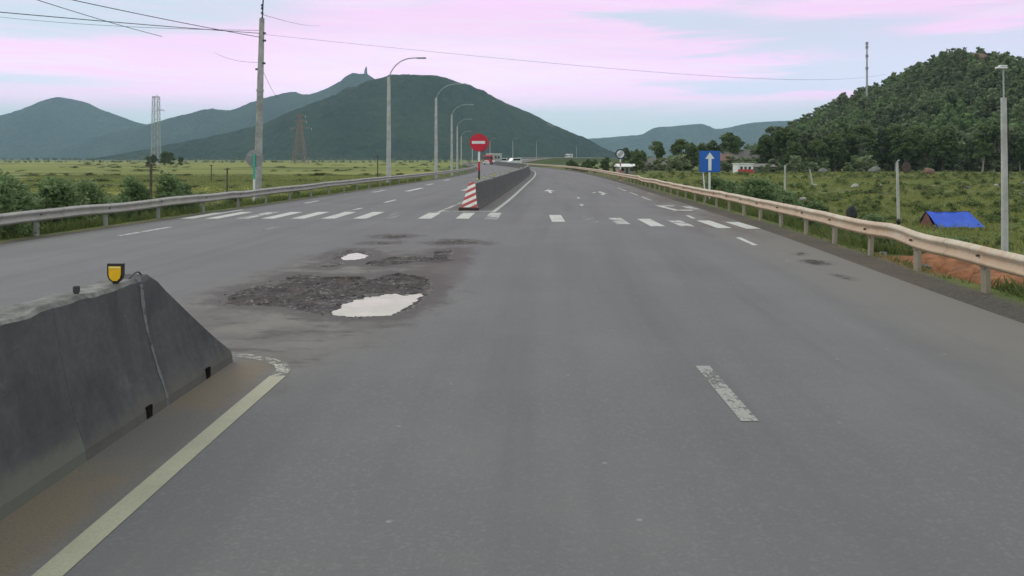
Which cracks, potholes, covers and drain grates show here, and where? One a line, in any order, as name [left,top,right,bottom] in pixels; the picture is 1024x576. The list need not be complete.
pothole [363,249,457,266]
pothole [328,249,374,260]
pothole [219,272,434,318]
